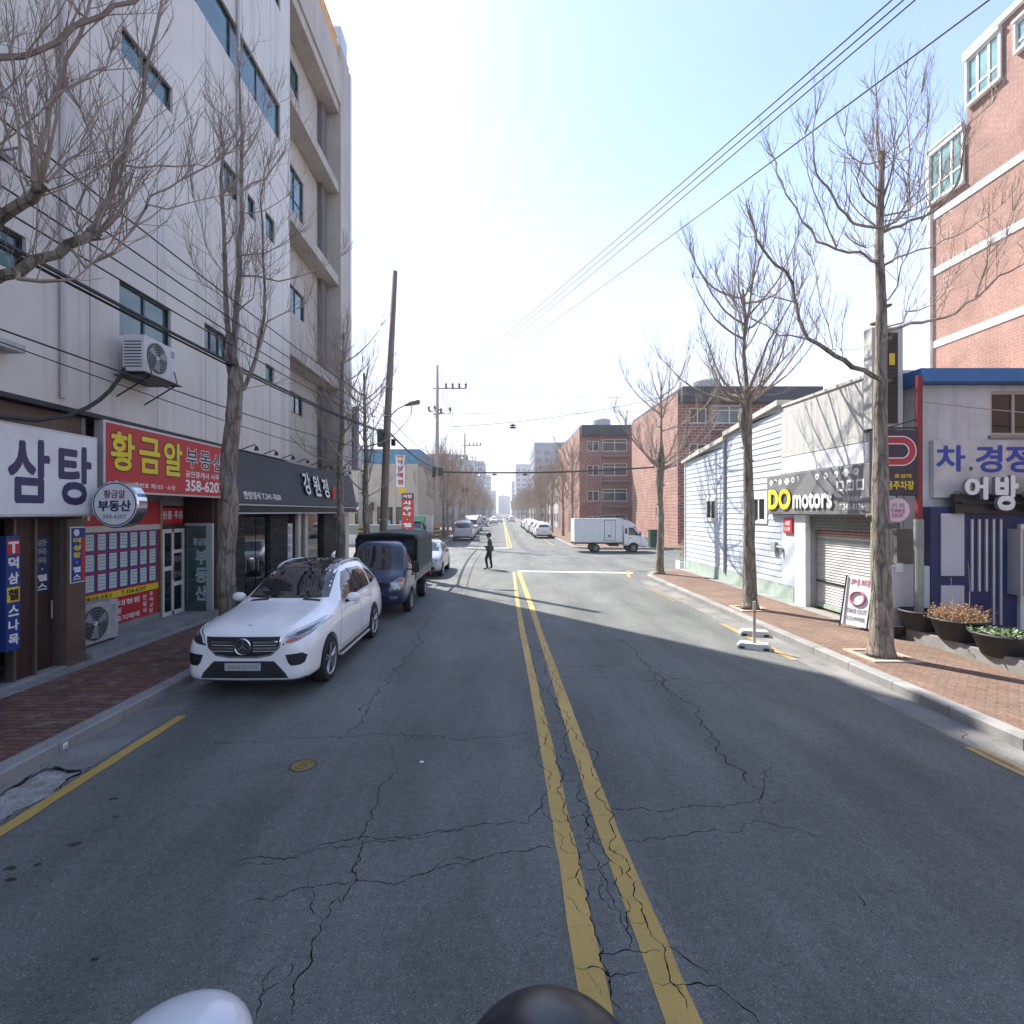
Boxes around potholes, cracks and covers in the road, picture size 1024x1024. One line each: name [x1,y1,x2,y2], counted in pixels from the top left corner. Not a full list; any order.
crack [232,745,550,1023]
manhole cover [289,759,317,772]
crack [544,638,824,842]
pothole [0,766,82,823]
crack [509,621,759,1022]
crack [214,602,526,744]
